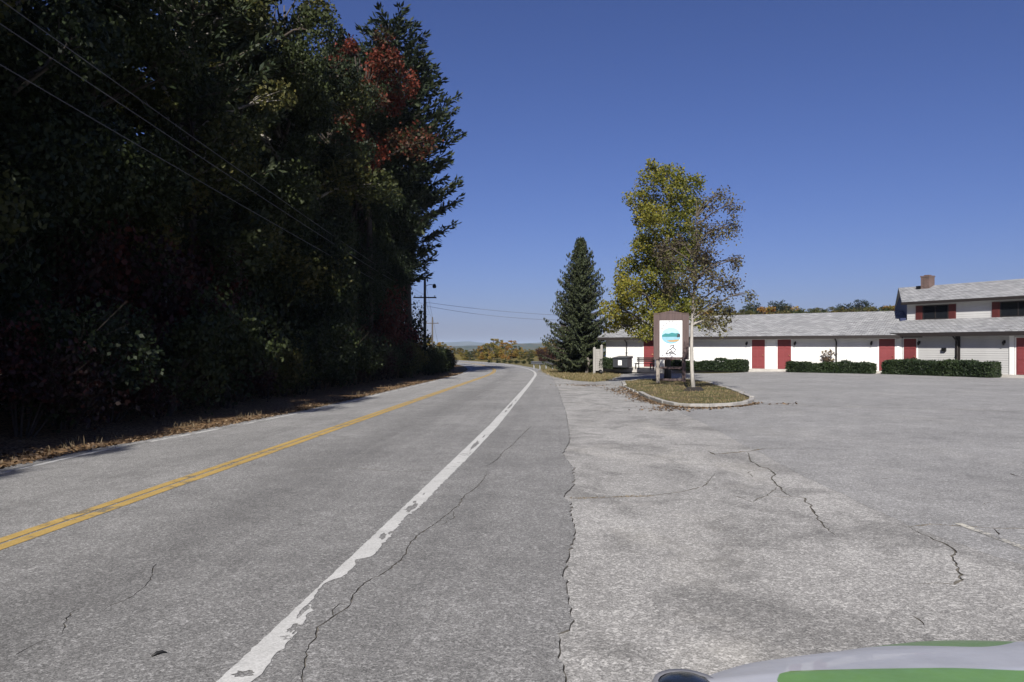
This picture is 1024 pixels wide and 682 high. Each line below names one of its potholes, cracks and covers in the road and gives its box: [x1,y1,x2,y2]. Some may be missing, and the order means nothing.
crack [301,427,531,682]
crack [16,565,155,655]
crack [576,477,712,499]
crack [708,448,835,535]
crack [903,524,1019,585]
